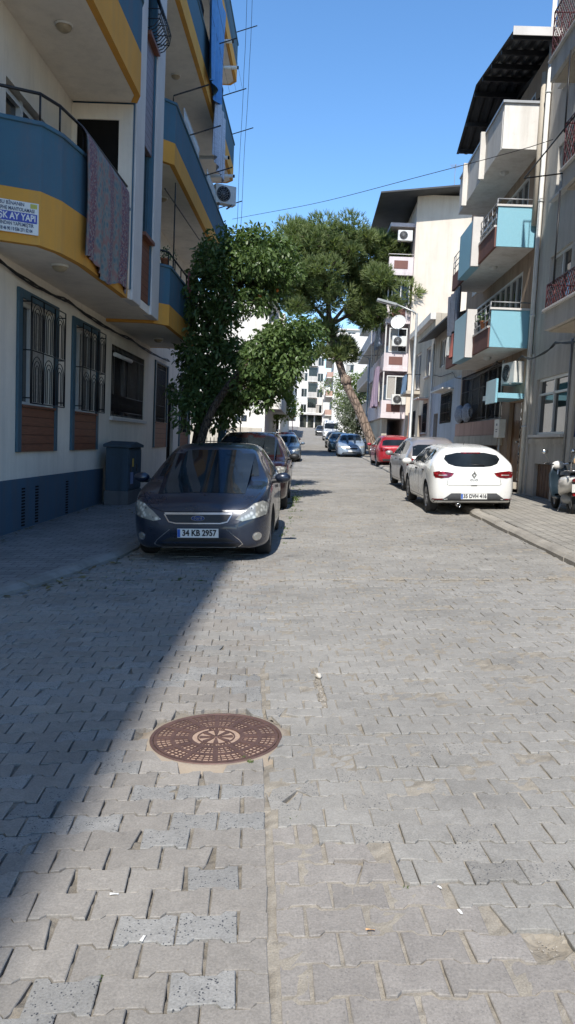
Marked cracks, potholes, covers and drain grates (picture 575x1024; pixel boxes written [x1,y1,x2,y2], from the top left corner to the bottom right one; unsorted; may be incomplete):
manhole cover [138,712,290,776]
